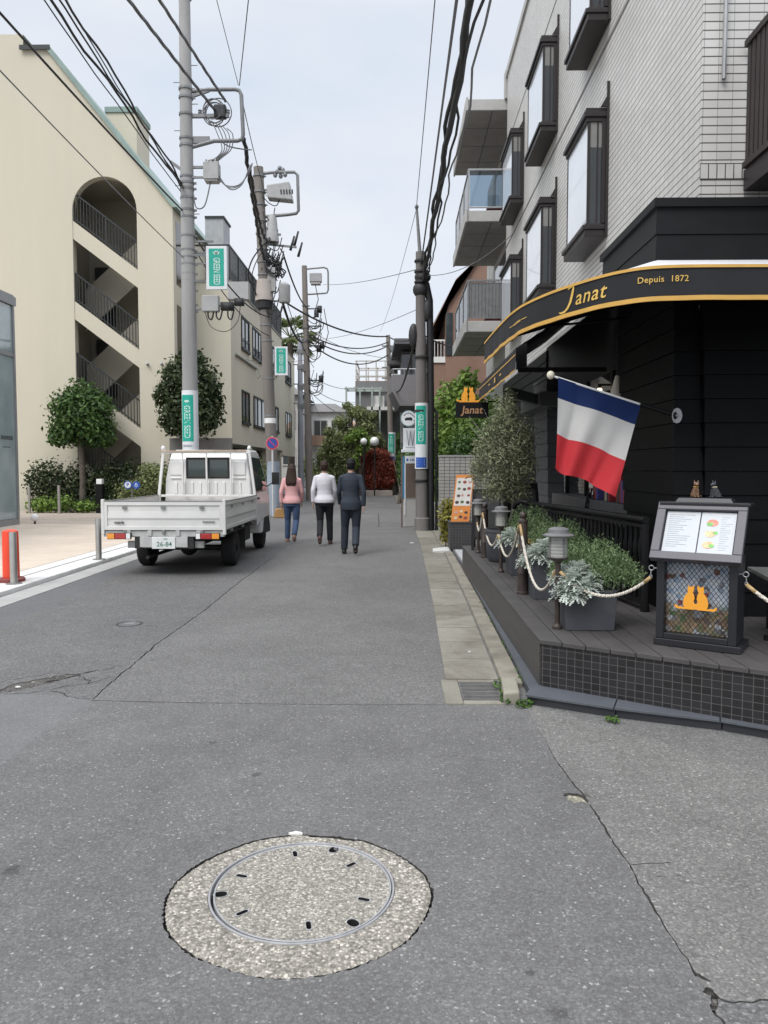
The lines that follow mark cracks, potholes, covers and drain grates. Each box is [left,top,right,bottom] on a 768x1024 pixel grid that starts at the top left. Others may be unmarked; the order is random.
crack [545,739,768,1024]
pothole [563,793,589,803]
manhole cover [161,831,434,980]
drain grate [441,679,504,705]
